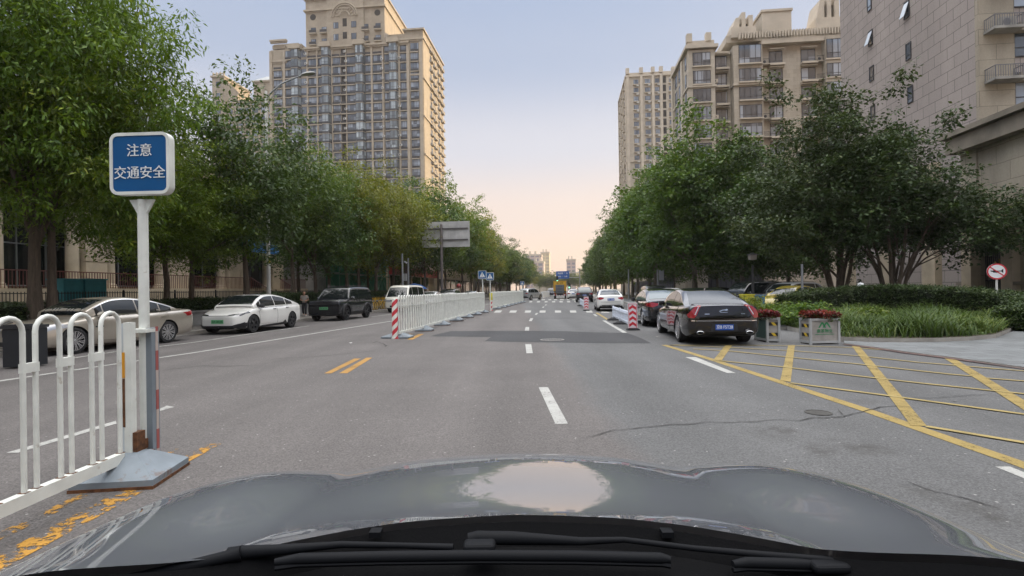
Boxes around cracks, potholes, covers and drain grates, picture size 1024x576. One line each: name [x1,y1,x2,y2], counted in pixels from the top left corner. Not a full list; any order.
crack [589,406,913,437]
